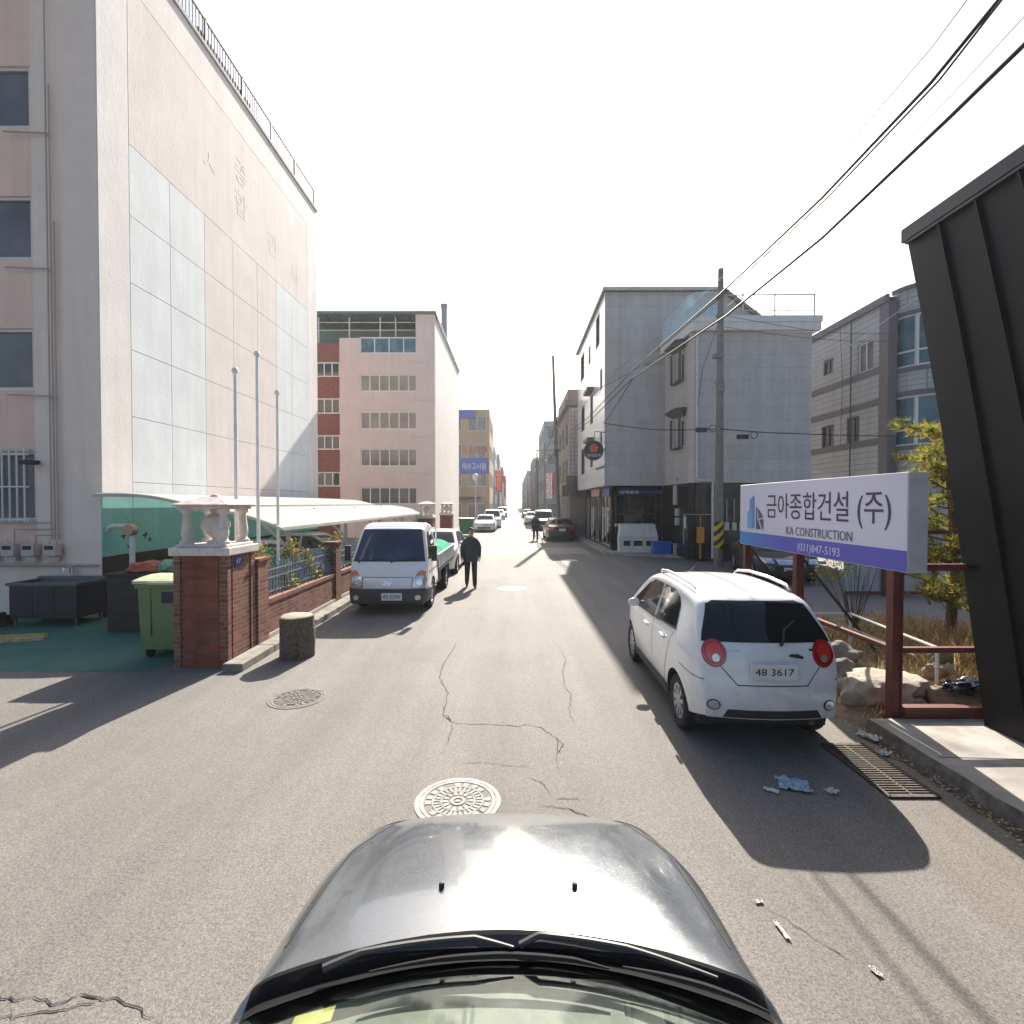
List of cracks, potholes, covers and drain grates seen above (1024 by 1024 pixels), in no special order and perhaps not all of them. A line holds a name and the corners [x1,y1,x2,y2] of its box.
crack [0,993,158,1021]
crack [430,642,564,771]
crack [470,762,587,817]
manhole cover [414,778,501,818]
manhole cover [267,688,327,709]
drain grate [820,743,942,799]
